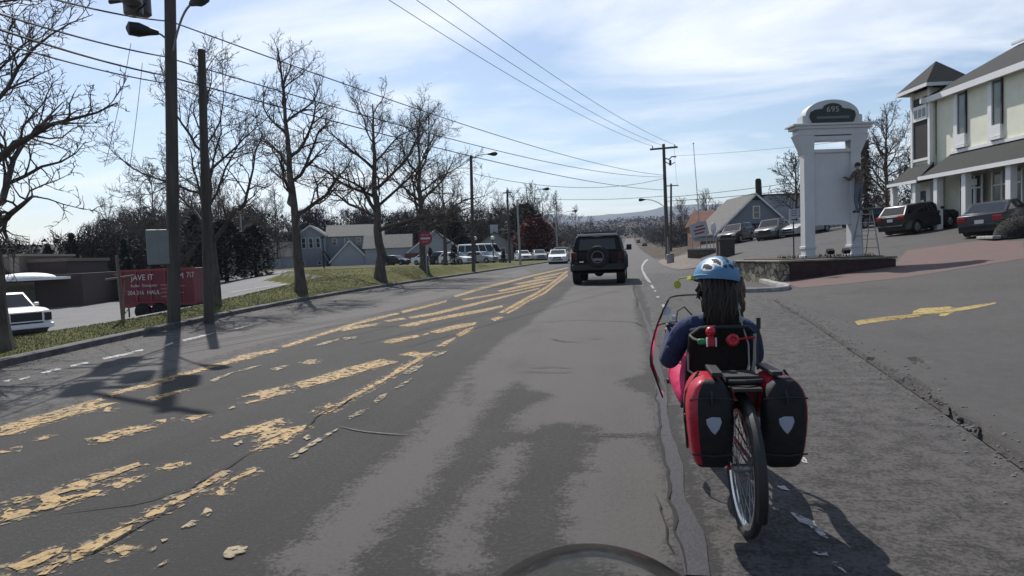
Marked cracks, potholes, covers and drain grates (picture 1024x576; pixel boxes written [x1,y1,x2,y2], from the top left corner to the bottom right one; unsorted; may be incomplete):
crack [655,494,675,553]
crack [55,450,253,557]
crack [305,396,407,435]
